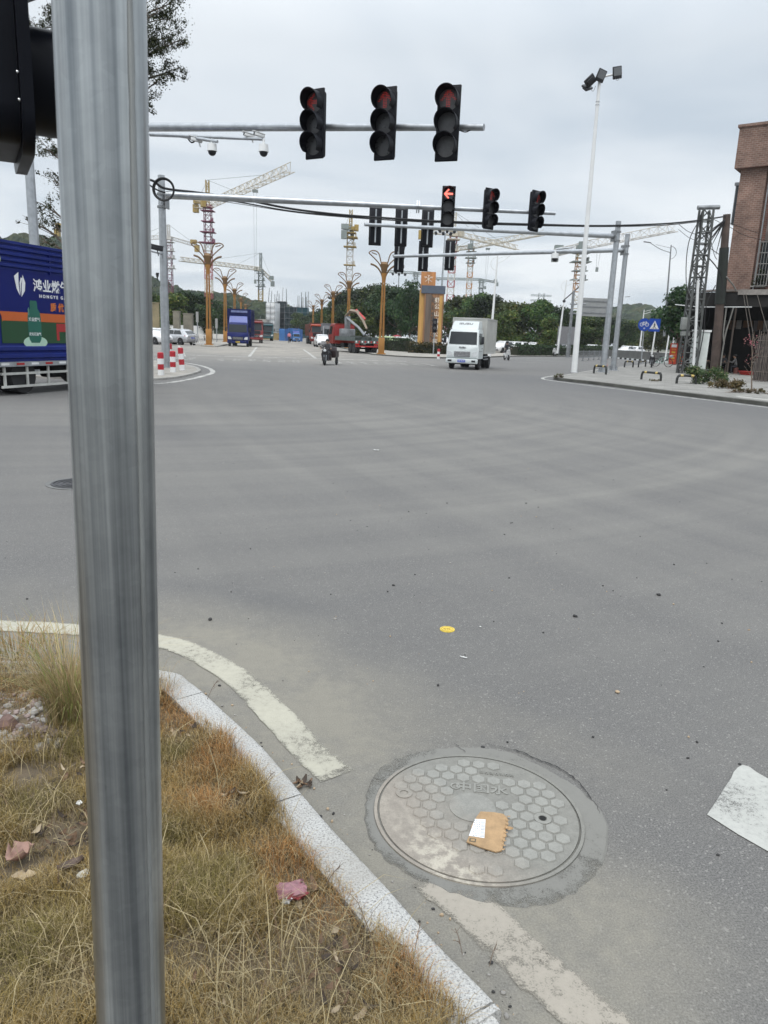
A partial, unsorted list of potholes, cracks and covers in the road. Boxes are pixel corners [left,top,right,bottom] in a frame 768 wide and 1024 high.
manhole cover [364,747,608,908]
manhole cover [45,478,73,490]
